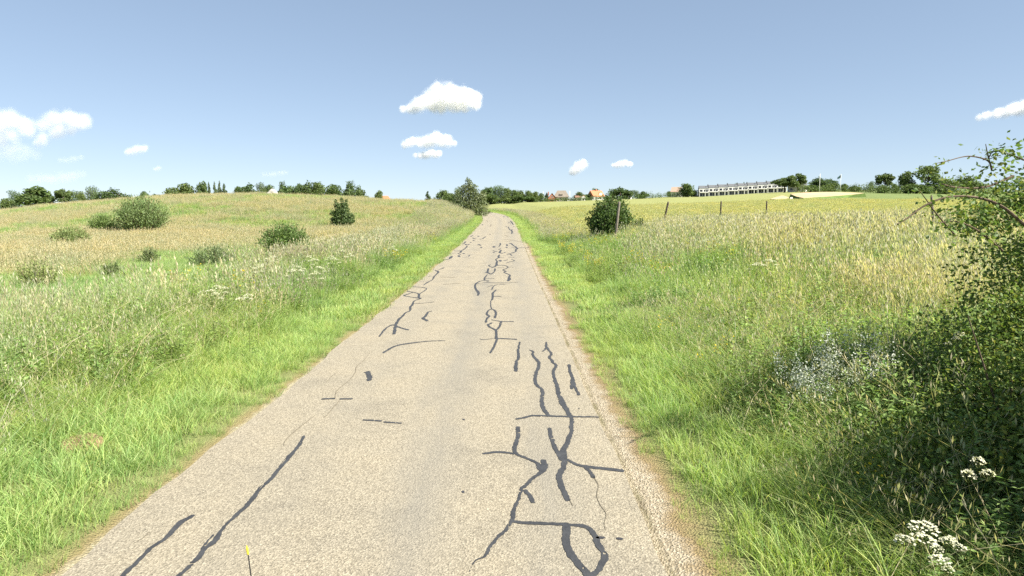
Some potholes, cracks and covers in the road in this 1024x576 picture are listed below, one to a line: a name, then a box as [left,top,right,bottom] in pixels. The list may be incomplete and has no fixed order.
crack [283,354,369,446]
